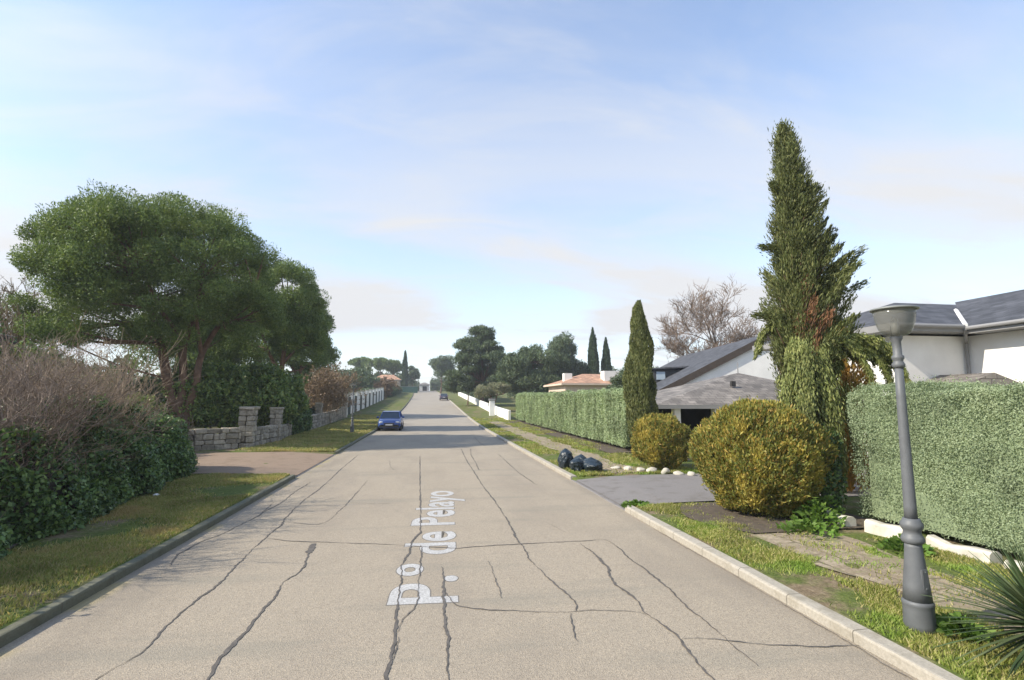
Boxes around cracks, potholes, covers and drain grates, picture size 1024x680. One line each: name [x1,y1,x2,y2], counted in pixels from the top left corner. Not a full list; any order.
crack [95,438,913,680]
